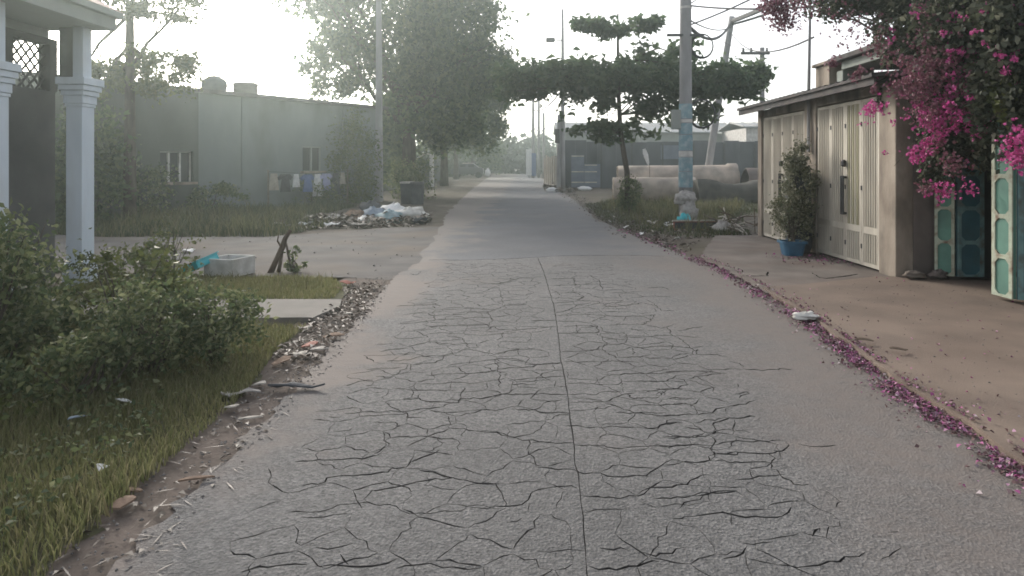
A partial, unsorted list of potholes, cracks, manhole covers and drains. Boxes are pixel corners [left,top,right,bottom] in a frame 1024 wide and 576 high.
crack [231,255,865,576]
